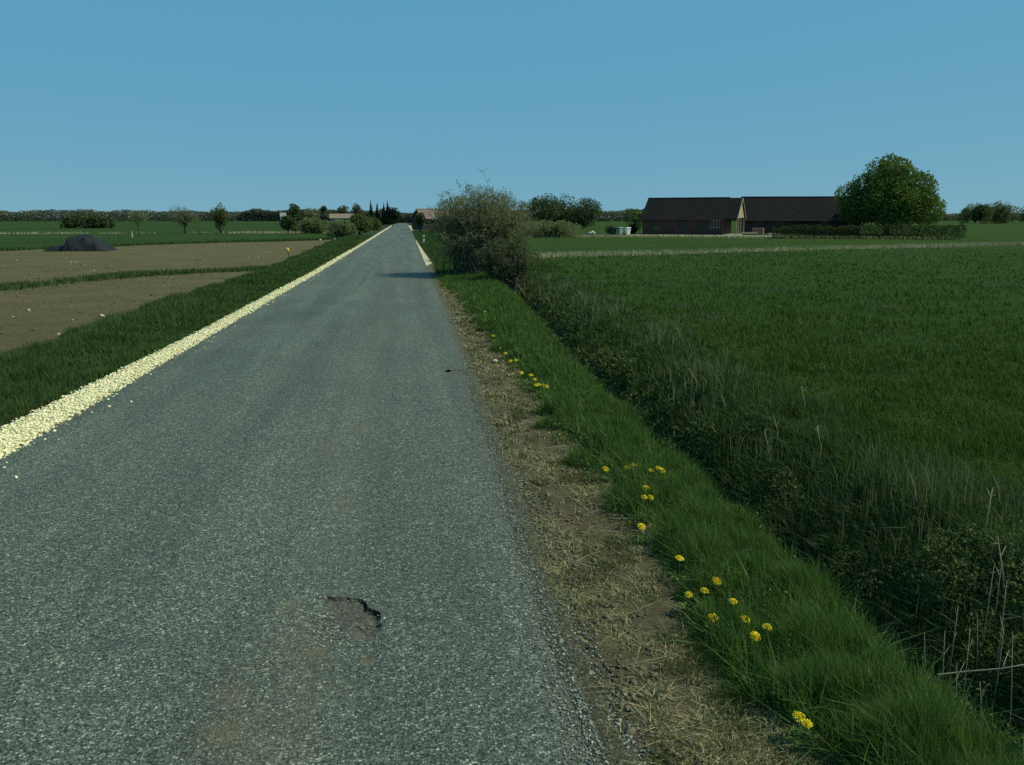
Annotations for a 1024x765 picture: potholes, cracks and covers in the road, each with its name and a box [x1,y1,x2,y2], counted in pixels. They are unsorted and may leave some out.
pothole [309,595,383,649]
